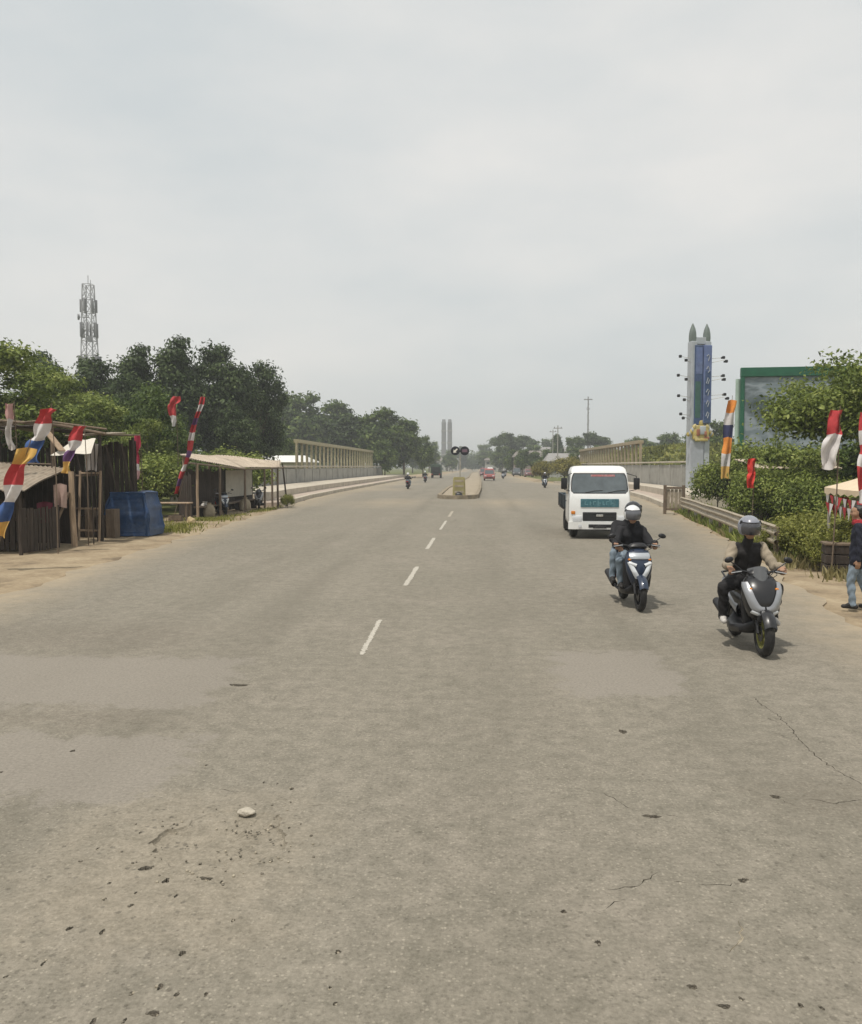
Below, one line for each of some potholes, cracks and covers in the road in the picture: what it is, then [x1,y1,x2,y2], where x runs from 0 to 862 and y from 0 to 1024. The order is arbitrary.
crack [754,697,862,807]
crack [606,872,732,909]
